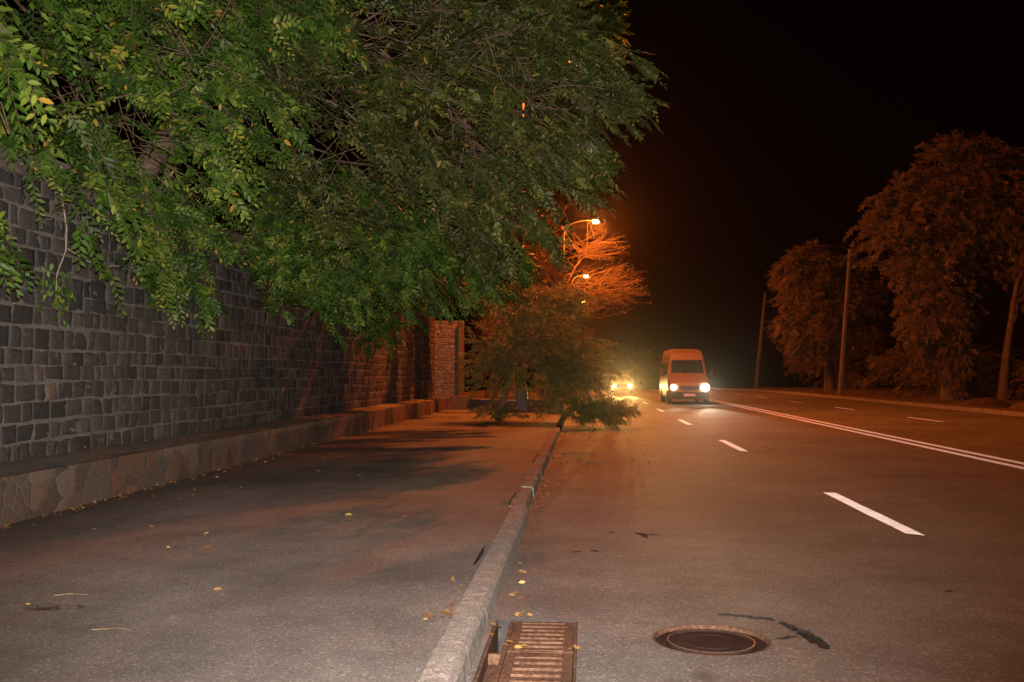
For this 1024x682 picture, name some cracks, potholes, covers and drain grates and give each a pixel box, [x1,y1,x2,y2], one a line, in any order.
drain grate [473,620,578,682]
pothole [23,603,86,611]
manhole cover [652,624,772,657]
